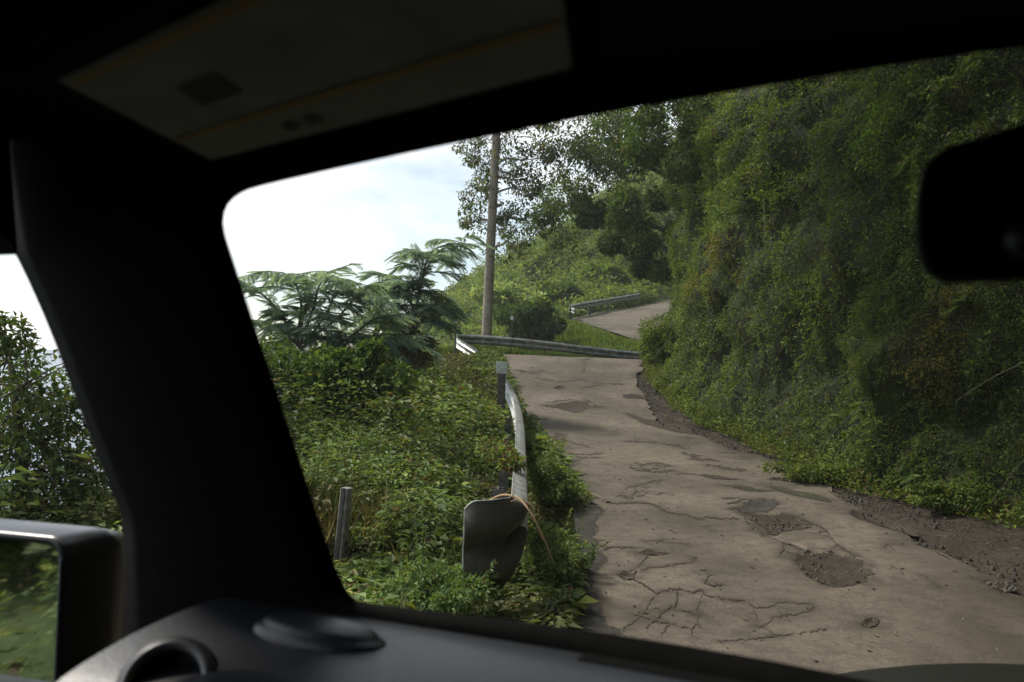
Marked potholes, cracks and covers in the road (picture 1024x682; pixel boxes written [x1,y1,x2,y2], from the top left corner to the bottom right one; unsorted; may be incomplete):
pothole [861,618,879,628]
pothole [749,513,812,535]
crack [602,539,827,642]
pothole [795,549,874,587]
crack [609,436,861,561]
